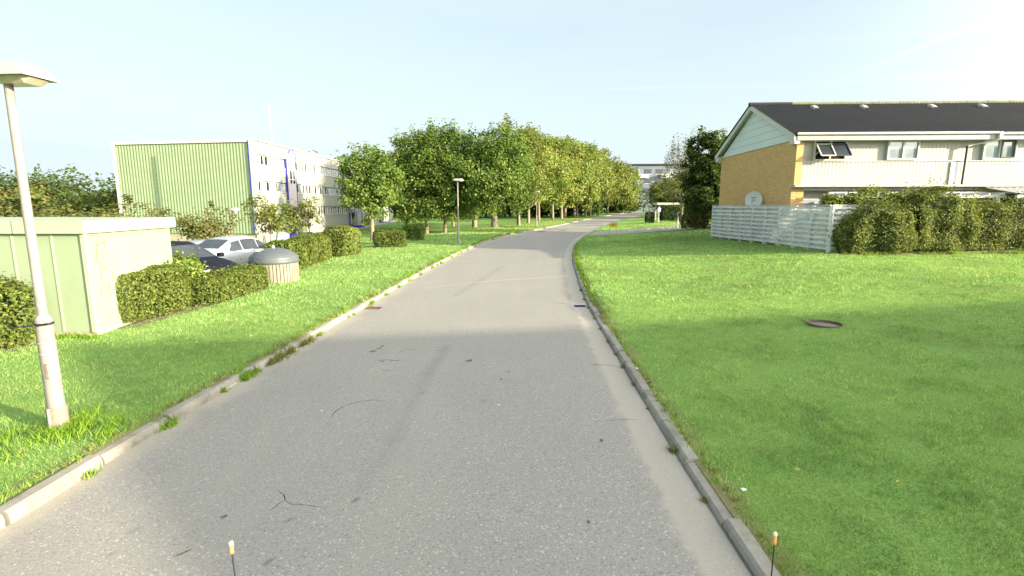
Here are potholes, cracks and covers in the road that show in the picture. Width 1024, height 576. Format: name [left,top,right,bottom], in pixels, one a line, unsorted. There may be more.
manhole cover [806,319,843,328]
